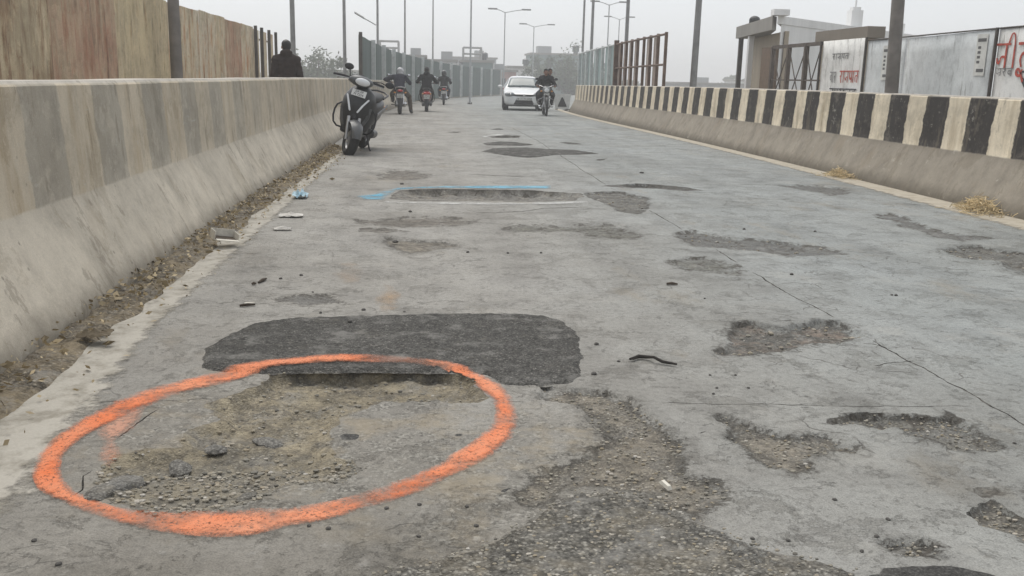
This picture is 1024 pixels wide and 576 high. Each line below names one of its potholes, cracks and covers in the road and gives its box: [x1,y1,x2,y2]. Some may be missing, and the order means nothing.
pothole [371,234,479,255]
pothole [583,191,652,214]
pothole [703,410,876,481]
pothole [662,256,748,276]
pothole [262,292,356,308]
pothole [488,384,759,525]
pothole [99,373,489,516]
pothole [798,409,1010,455]
crack [864,341,1024,425]
pothole [928,242,1024,274]
pothole [700,317,873,360]
pothole [869,212,1004,243]
